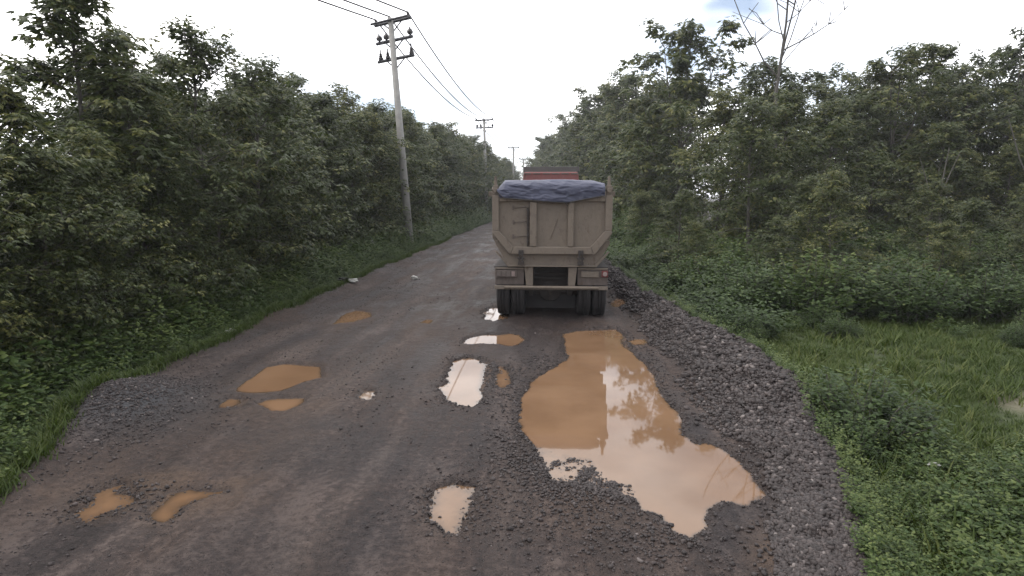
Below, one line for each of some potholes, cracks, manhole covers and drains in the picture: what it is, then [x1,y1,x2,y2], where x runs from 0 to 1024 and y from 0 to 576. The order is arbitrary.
pothole [476,305,514,322]
pothole [427,353,503,409]
pothole [507,325,775,545]
pothole [492,361,520,390]
pothole [50,475,152,528]
pothole [122,479,243,530]
pothole [324,307,379,325]
pothole [204,392,257,410]
pothole [408,473,495,541]
pothole [455,330,534,348]
pothole [218,359,332,396]
pothole [250,391,316,414]
